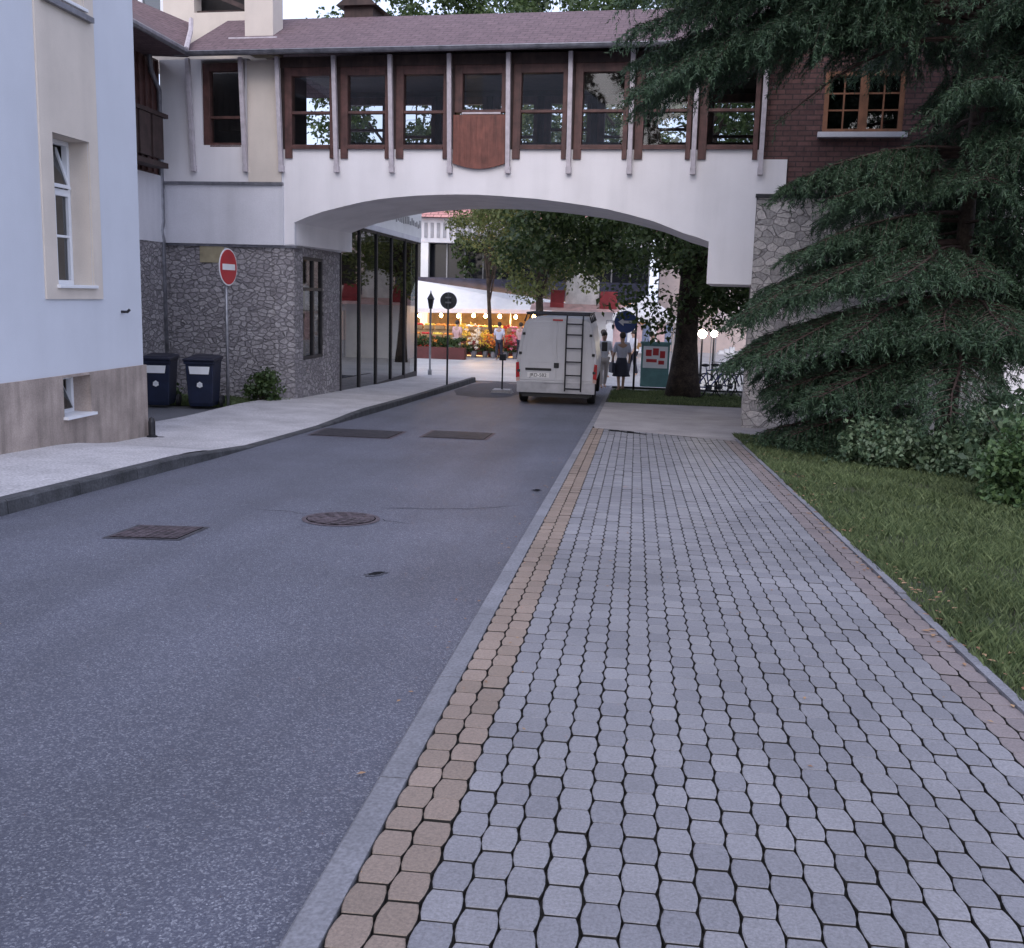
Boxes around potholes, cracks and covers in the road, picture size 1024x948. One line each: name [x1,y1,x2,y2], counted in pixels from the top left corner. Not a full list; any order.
drain grate [308,428,405,439]
manhole cover [302,512,380,526]
drain grate [419,430,496,440]
